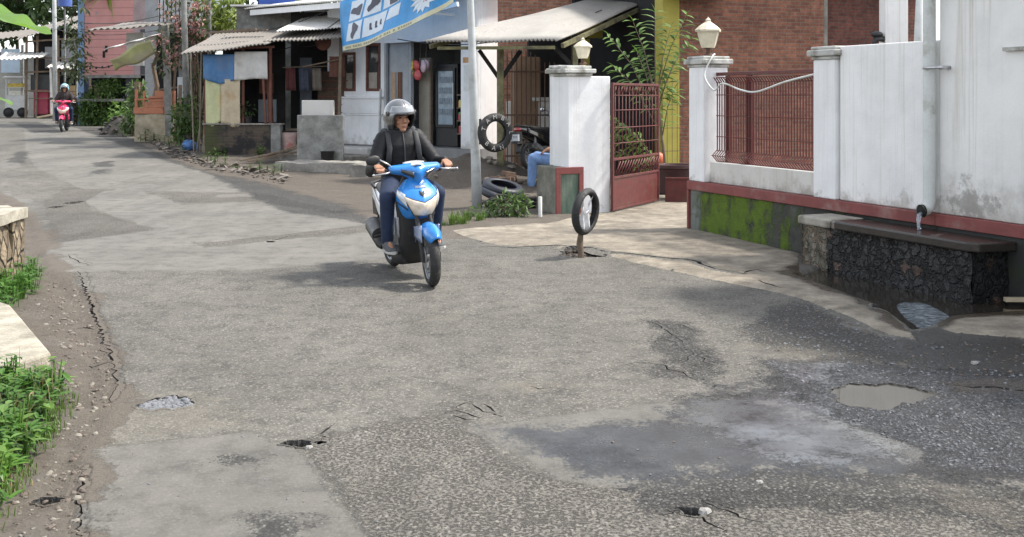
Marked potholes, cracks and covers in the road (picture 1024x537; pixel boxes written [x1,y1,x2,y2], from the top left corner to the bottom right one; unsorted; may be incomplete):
pothole [131,394,200,412]
pothole [668,506,714,519]
pothole [820,381,948,414]
crack [739,269,784,288]
pothole [554,245,611,259]
pothole [277,439,315,449]
crack [624,317,721,387]
crack [60,464,92,537]
crack [62,254,125,404]
crack [444,401,504,423]
